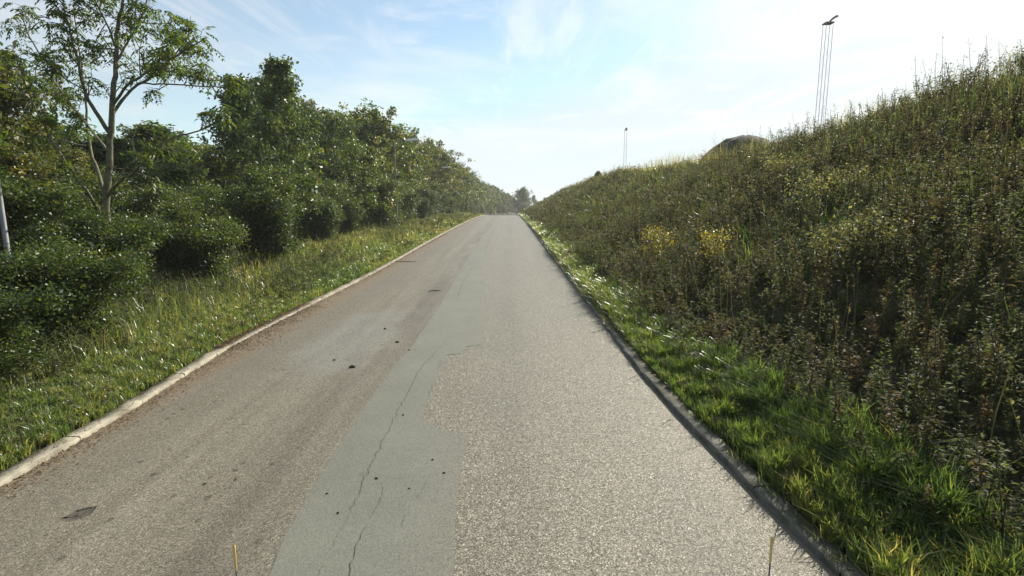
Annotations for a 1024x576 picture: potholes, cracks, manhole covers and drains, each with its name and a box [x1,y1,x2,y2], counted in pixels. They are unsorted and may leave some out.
pothole [59,506,97,522]
crack [333,339,447,576]
